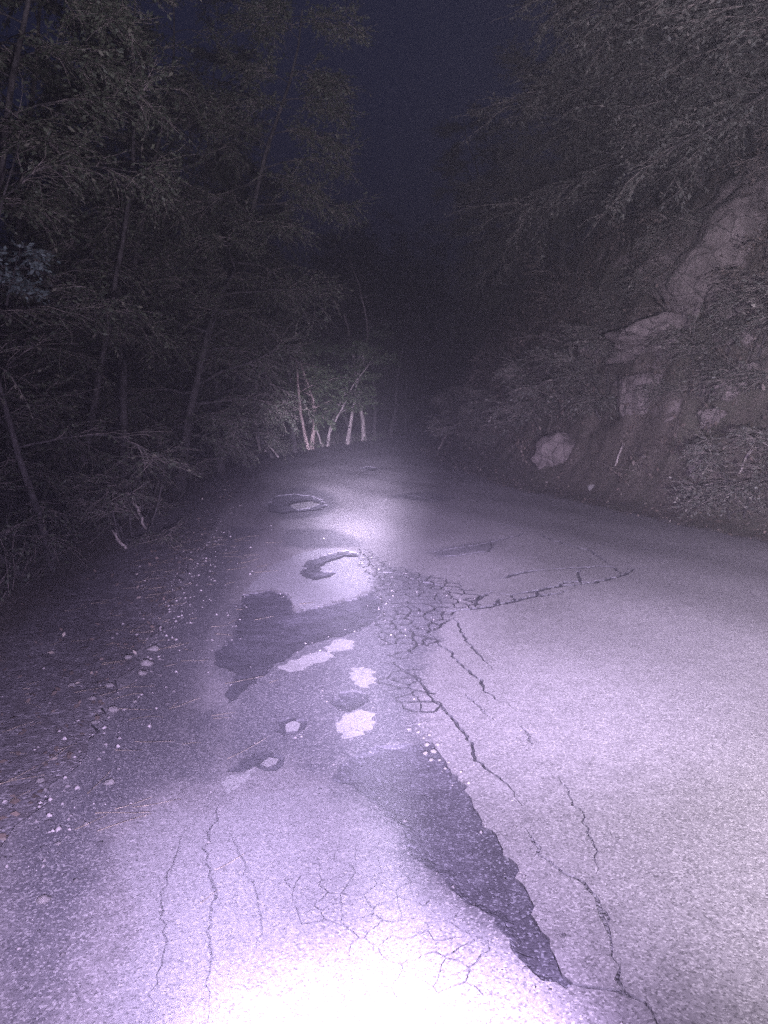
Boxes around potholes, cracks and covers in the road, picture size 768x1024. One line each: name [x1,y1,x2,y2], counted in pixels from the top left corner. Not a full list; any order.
pothole [226,749,285,772]
crack [146,829,185,1024]
pothole [264,494,329,515]
crack [202,793,263,1023]
pothole [271,716,307,736]
crack [355,522,643,805]
crack [284,845,501,1000]
pothole [299,550,360,580]
crack [525,775,658,1024]
